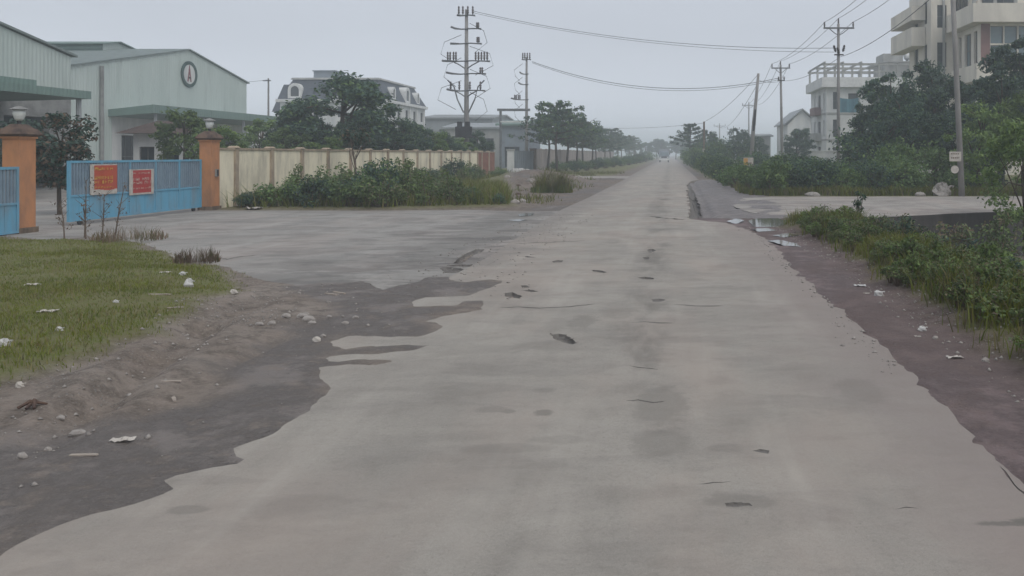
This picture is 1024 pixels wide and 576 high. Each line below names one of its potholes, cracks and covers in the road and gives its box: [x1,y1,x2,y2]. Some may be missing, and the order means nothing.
pothole [454,249,484,264]
pothole [552,334,575,344]
